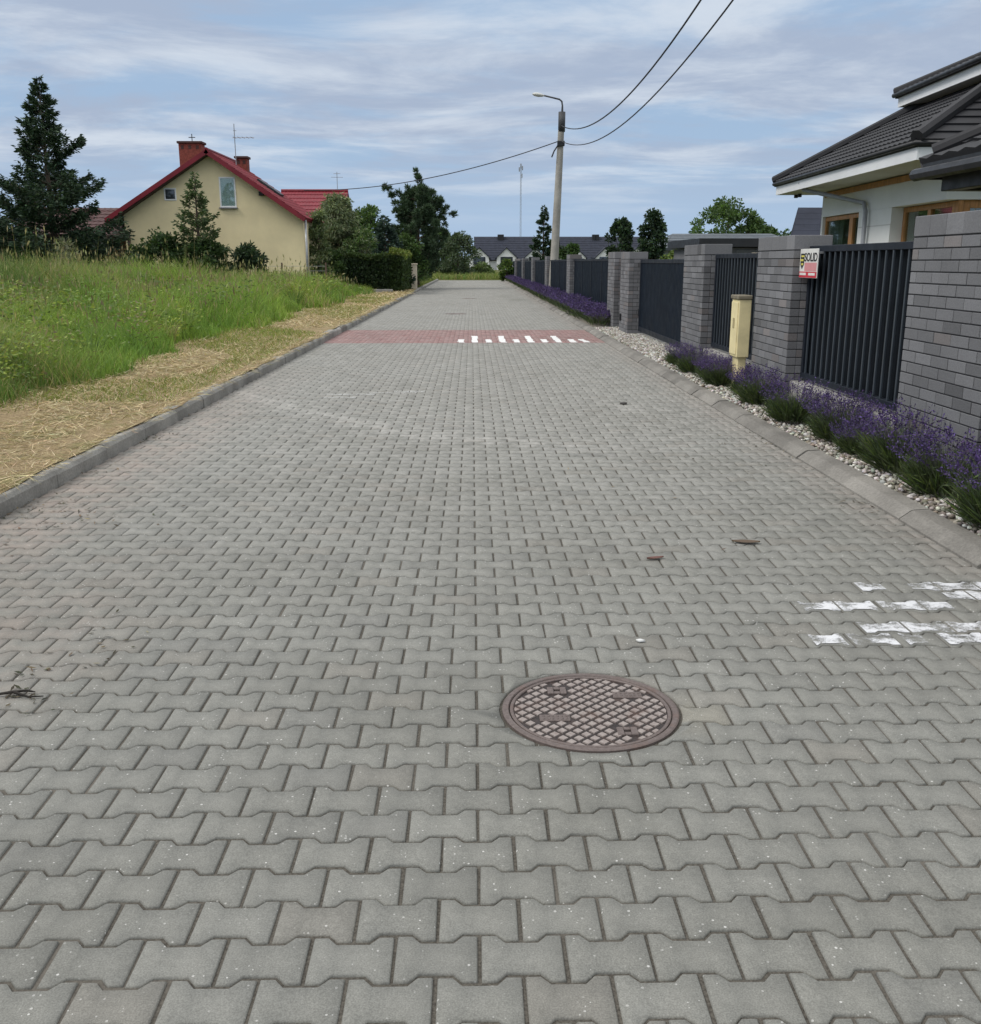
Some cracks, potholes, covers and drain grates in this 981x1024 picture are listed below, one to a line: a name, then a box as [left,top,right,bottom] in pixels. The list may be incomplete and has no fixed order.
manhole cover [502,673,679,753]
